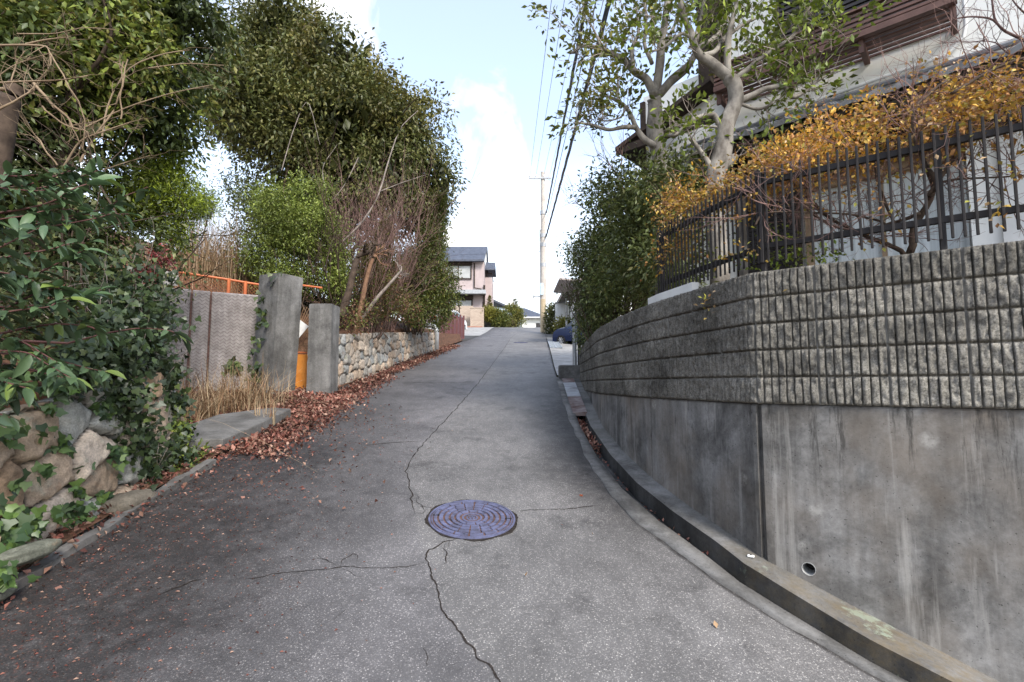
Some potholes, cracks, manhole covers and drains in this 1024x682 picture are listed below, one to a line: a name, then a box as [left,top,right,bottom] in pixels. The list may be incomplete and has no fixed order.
crack [256,538,501,682]
manhole cover [425,499,518,541]
